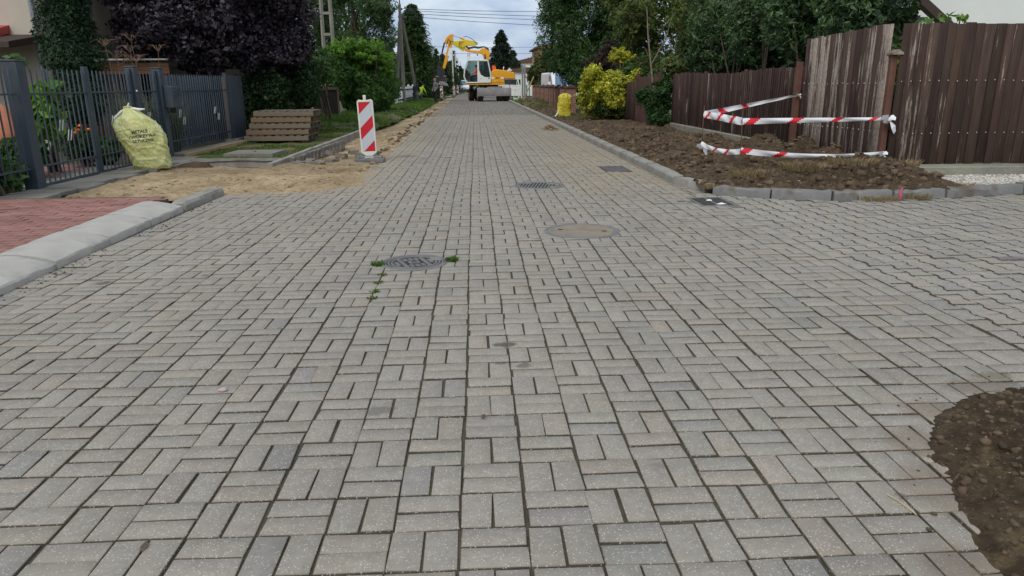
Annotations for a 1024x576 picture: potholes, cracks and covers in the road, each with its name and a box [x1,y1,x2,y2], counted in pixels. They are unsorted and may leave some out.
manhole cover [382,254,447,272]
manhole cover [544,223,620,240]
drain grate [684,197,742,208]
